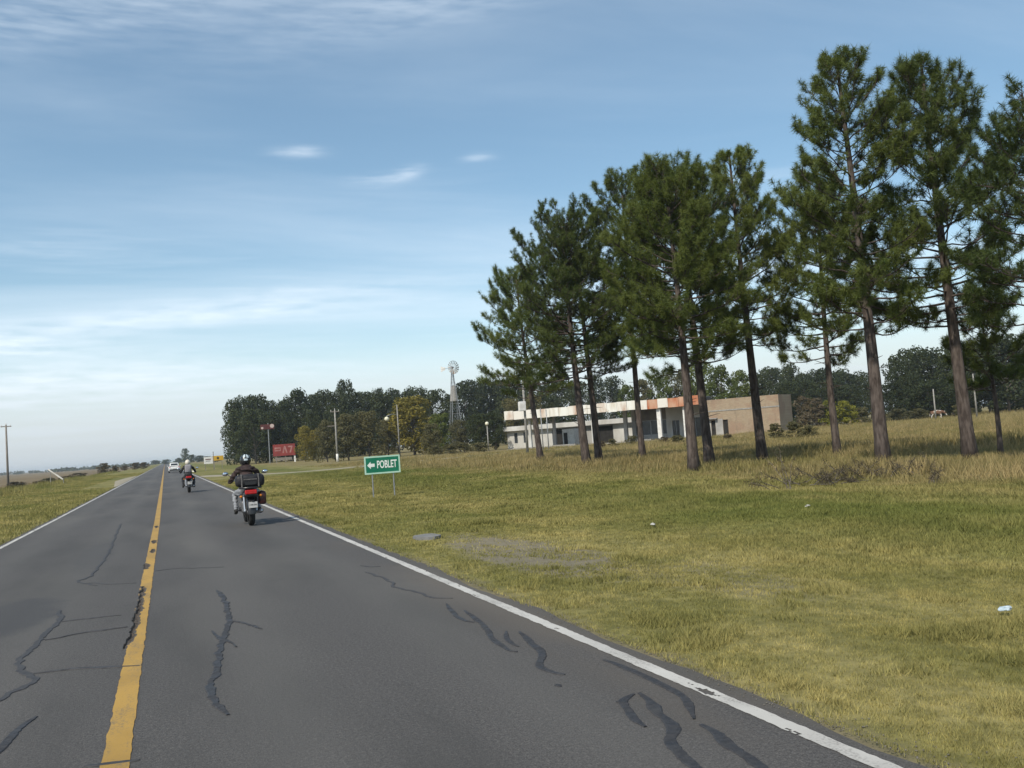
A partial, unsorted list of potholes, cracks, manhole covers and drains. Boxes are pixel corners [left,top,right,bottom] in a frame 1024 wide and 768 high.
crack [602,659,769,768]
crack [360,565,564,675]
crack [204,590,262,715]
crack [0,524,216,753]
